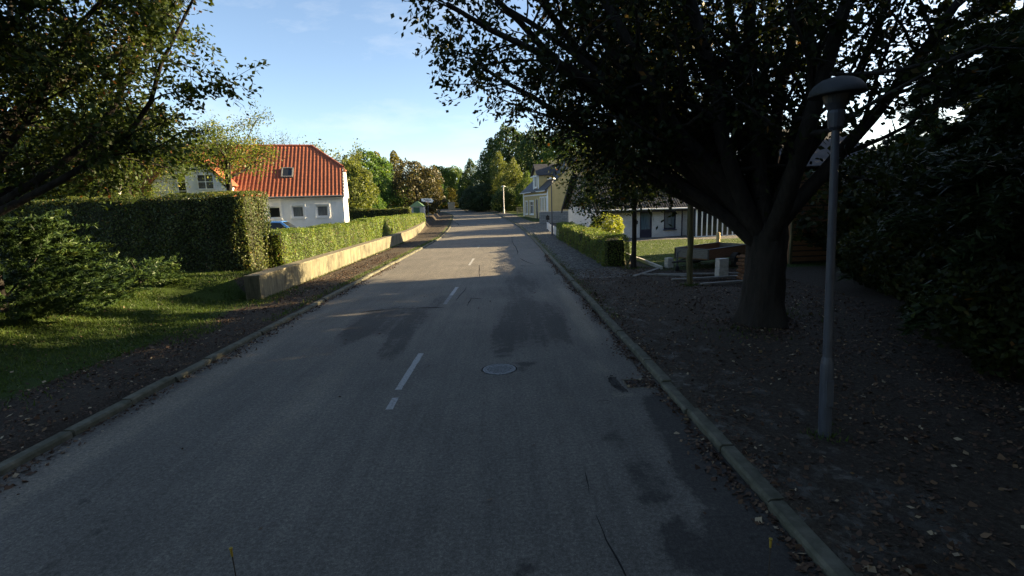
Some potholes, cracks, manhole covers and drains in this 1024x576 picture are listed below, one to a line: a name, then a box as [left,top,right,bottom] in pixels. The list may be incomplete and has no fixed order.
pothole [607,375,628,392]
crack [360,268,481,313]
crack [596,516,627,576]
manhole cover [481,363,517,375]
